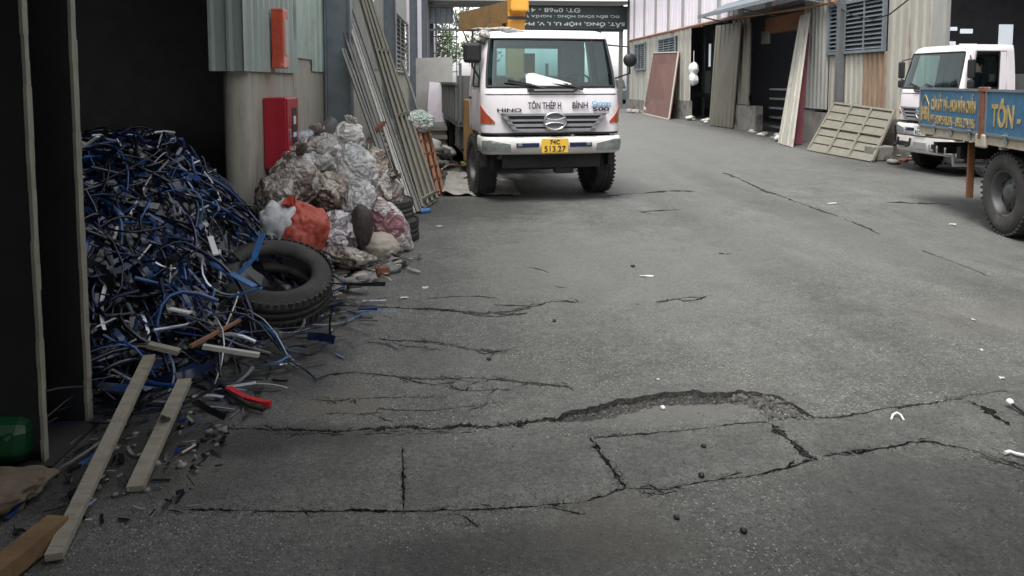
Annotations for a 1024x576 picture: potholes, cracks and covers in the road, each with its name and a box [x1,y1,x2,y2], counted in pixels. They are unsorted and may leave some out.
crack [336,267,579,317]
crack [204,372,573,439]
crack [379,336,507,356]
crack [602,190,692,214]
pothole [550,389,816,423]
